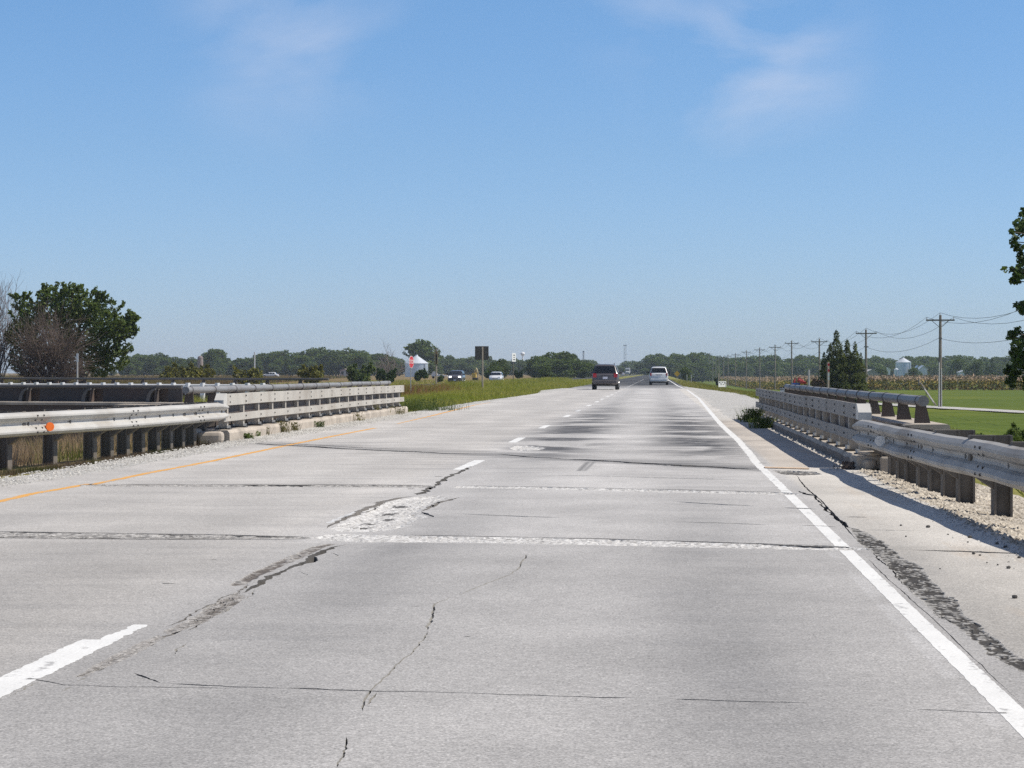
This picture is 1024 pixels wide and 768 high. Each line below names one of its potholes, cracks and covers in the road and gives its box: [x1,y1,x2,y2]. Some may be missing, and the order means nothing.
crack [785,491,1024,672]
crack [9,467,627,767]
pothole [329,496,449,532]
